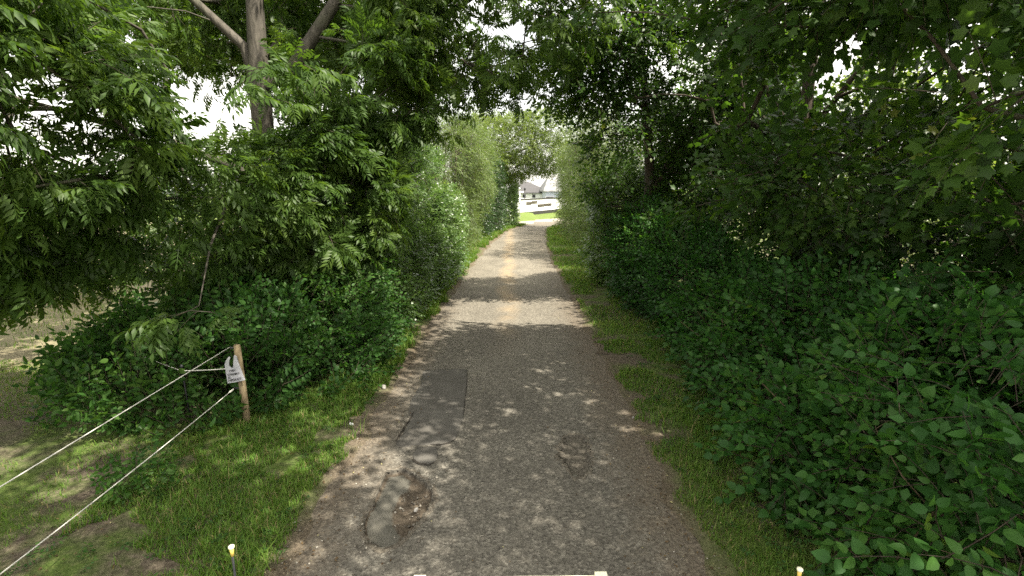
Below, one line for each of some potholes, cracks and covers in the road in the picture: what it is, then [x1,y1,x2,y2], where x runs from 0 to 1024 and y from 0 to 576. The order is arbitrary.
pothole [554,433,598,481]
pothole [357,466,440,554]
crack [395,412,455,465]
